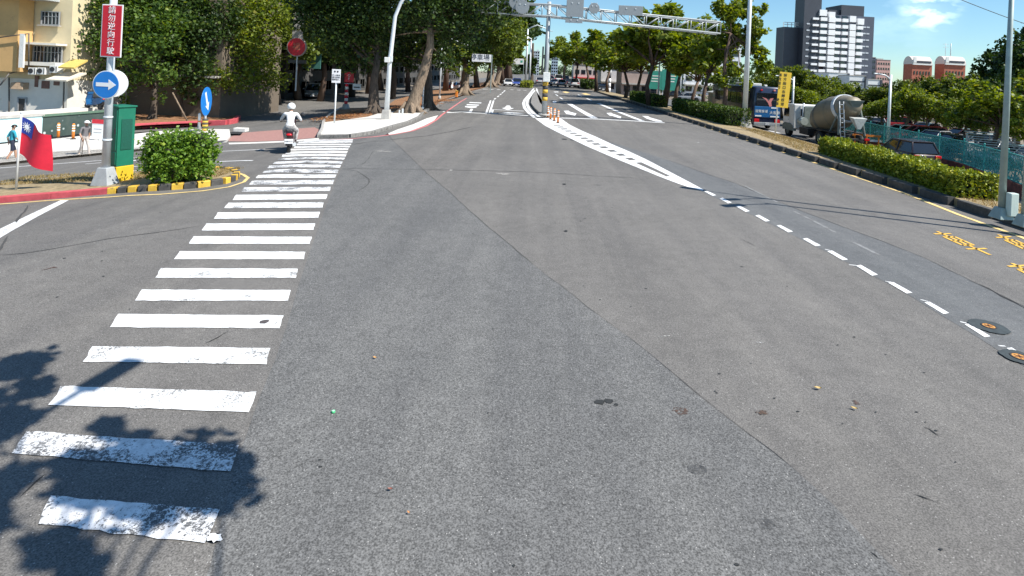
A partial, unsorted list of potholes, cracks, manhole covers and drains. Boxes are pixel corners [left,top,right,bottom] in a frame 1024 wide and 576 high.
manhole cover [968,319,1011,334]
manhole cover [998,349,1024,364]
